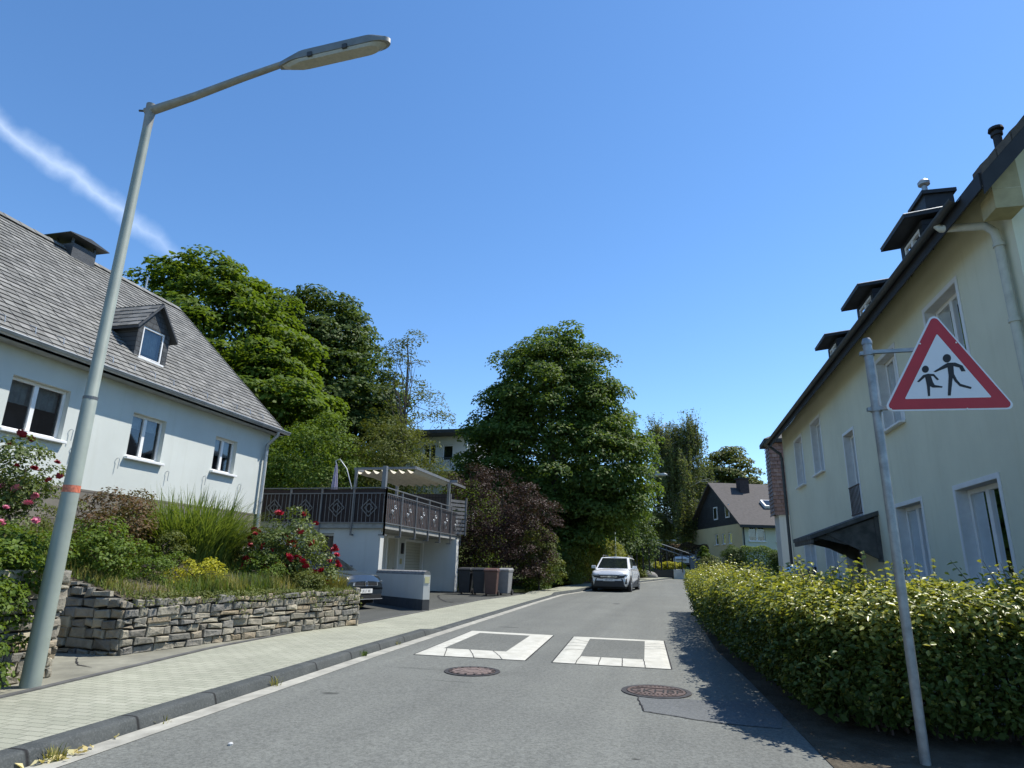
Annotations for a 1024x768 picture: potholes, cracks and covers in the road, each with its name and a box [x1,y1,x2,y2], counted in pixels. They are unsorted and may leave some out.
manhole cover [444,666,500,677]
manhole cover [621,684,692,699]
